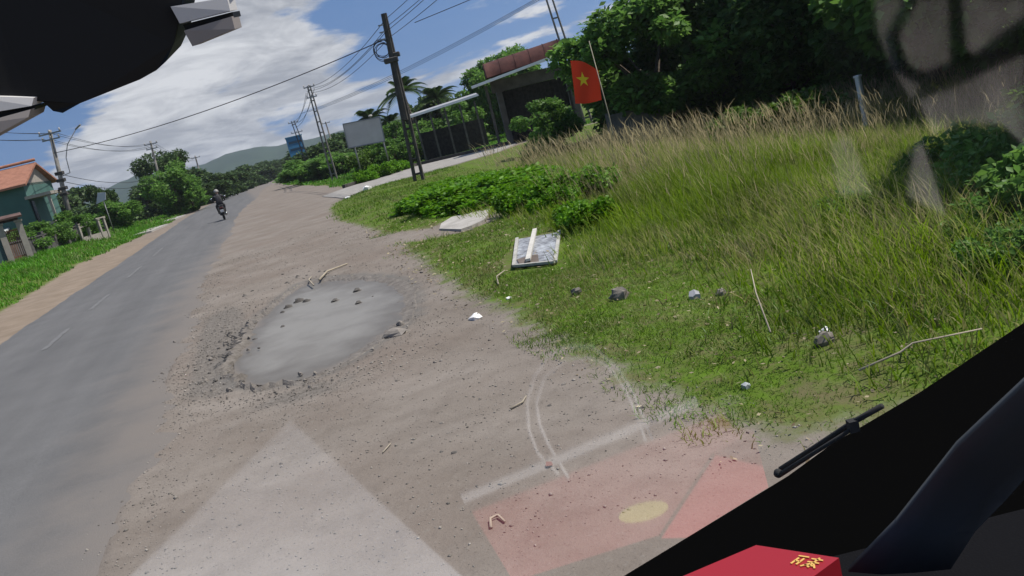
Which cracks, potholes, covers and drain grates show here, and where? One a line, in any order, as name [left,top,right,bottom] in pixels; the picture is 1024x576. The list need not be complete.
pothole [217,275,419,393]
